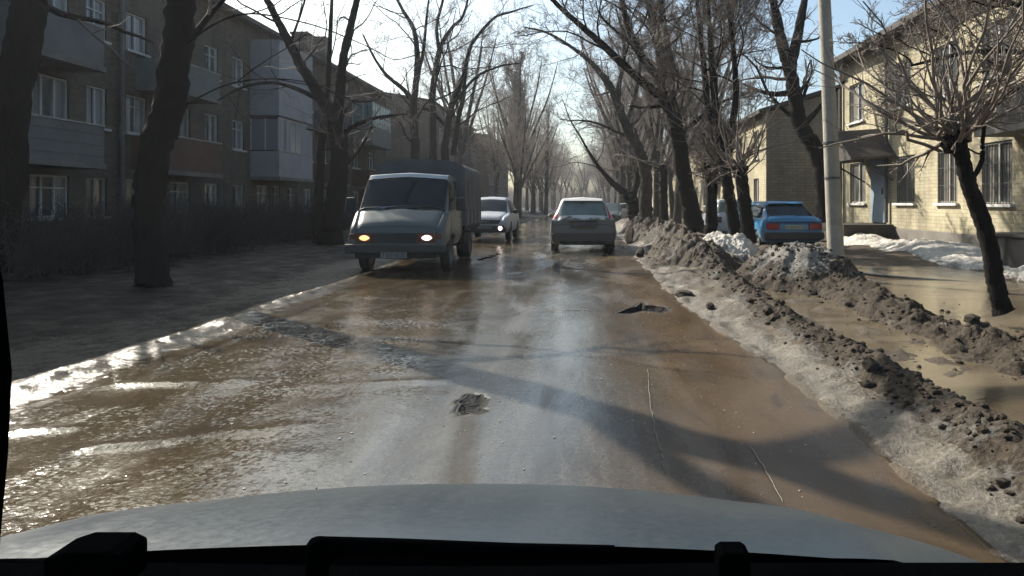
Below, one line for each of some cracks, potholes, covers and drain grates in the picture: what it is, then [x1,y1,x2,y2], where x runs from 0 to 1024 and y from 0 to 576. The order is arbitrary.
pothole [455,394,486,416]
pothole [614,302,671,315]
crack [647,370,664,468]
crack [749,444,783,503]
